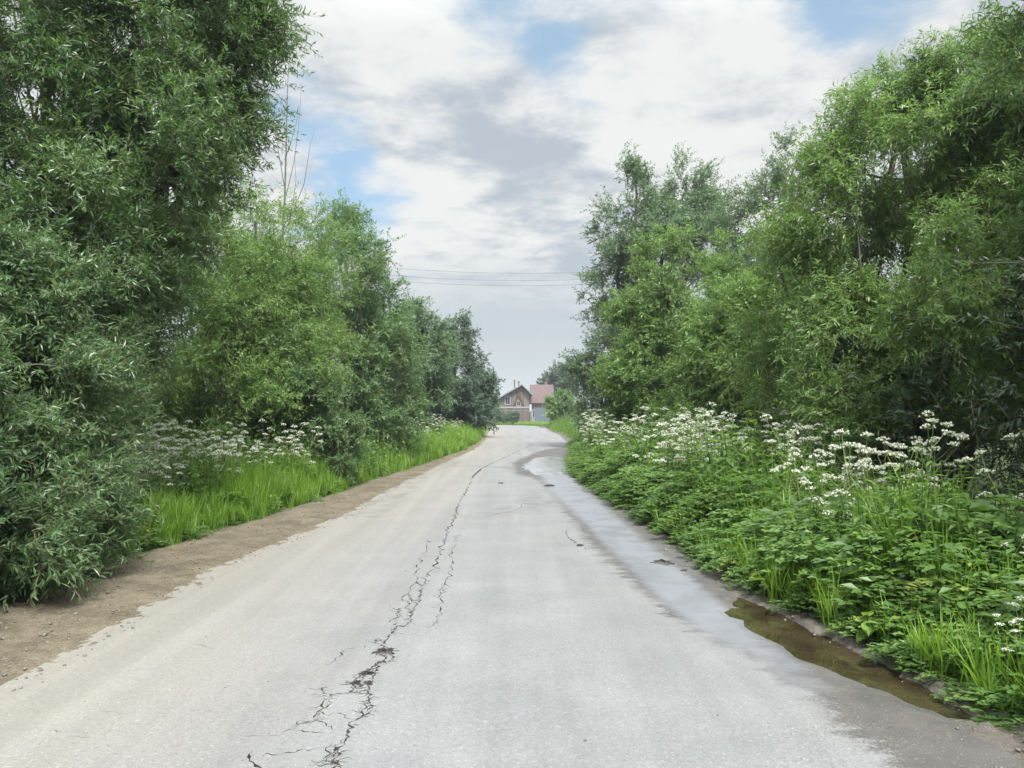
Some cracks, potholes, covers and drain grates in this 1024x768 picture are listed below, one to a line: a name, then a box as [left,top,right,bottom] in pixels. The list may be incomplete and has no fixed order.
crack [247,445,532,768]
